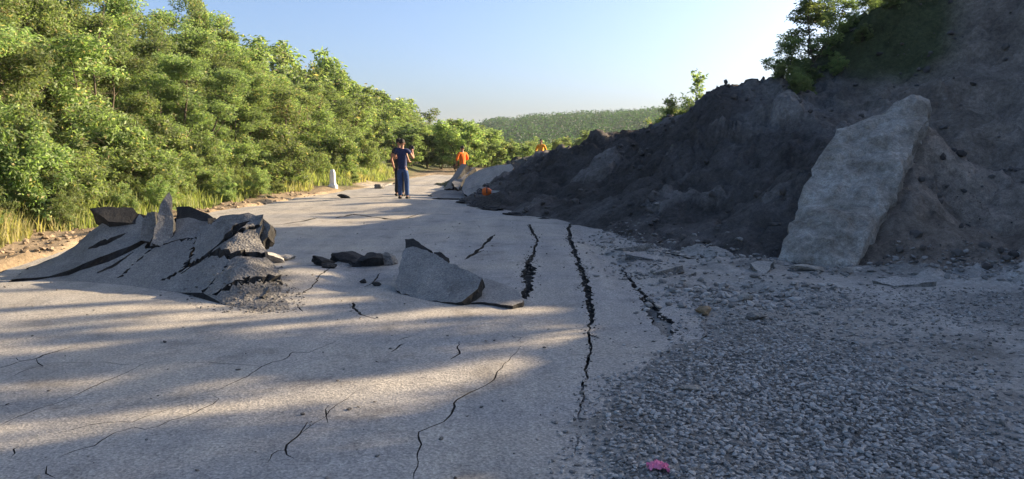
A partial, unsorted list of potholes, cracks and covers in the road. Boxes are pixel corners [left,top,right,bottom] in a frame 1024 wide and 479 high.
crack [566,226,595,447]
crack [631,282,668,325]
crack [524,224,537,299]
crack [413,338,521,478]
